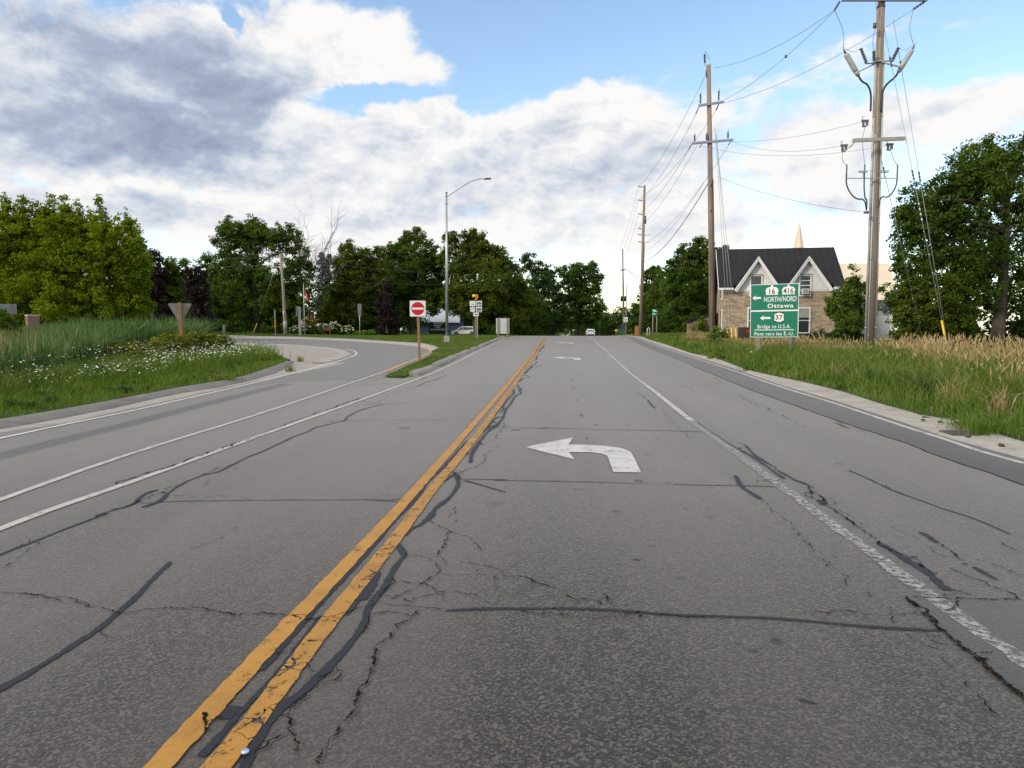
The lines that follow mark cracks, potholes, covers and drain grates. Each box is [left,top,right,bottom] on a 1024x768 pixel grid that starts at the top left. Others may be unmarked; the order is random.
crack [1,592,305,618]
crack [257,507,612,764]
crack [734,475,1024,715]
